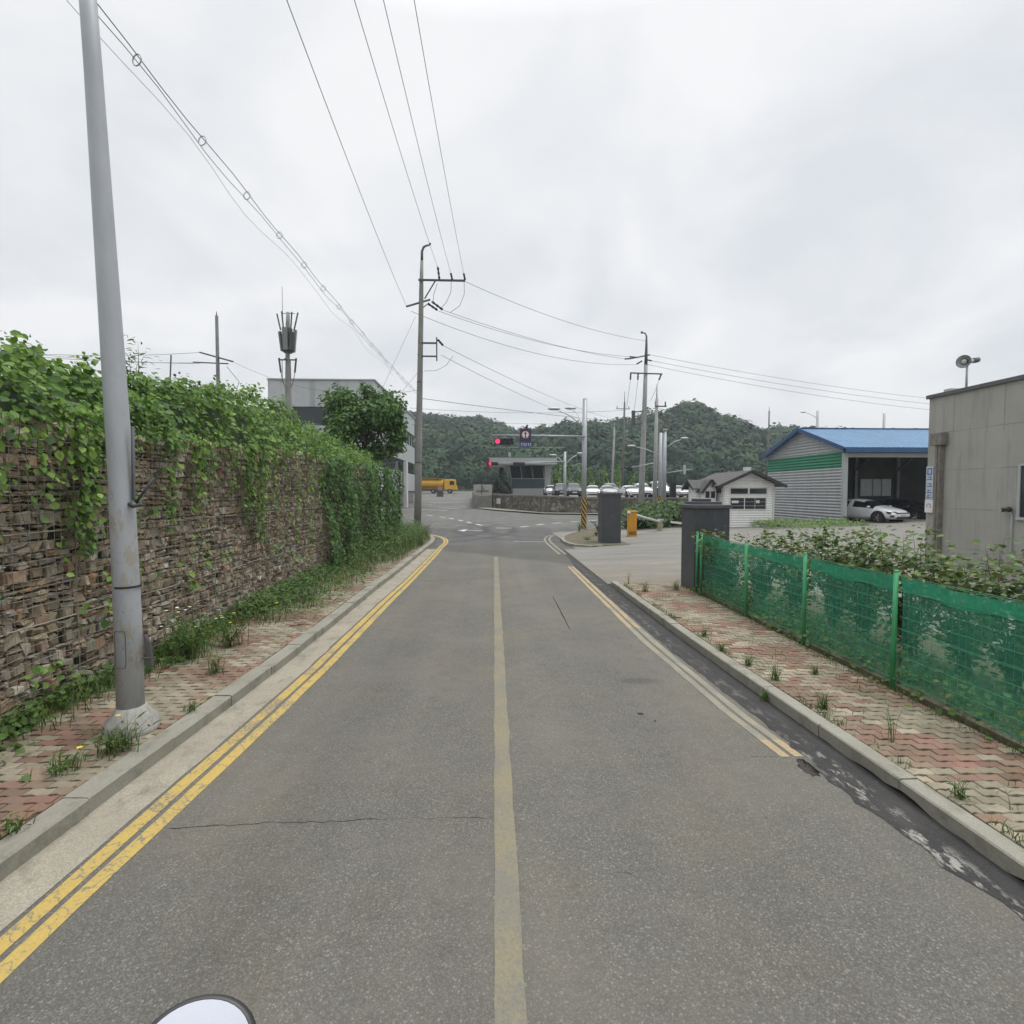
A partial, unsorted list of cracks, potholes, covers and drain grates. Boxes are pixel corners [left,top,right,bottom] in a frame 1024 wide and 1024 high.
crack [167,817,486,829]
pothole [796,759,820,777]
